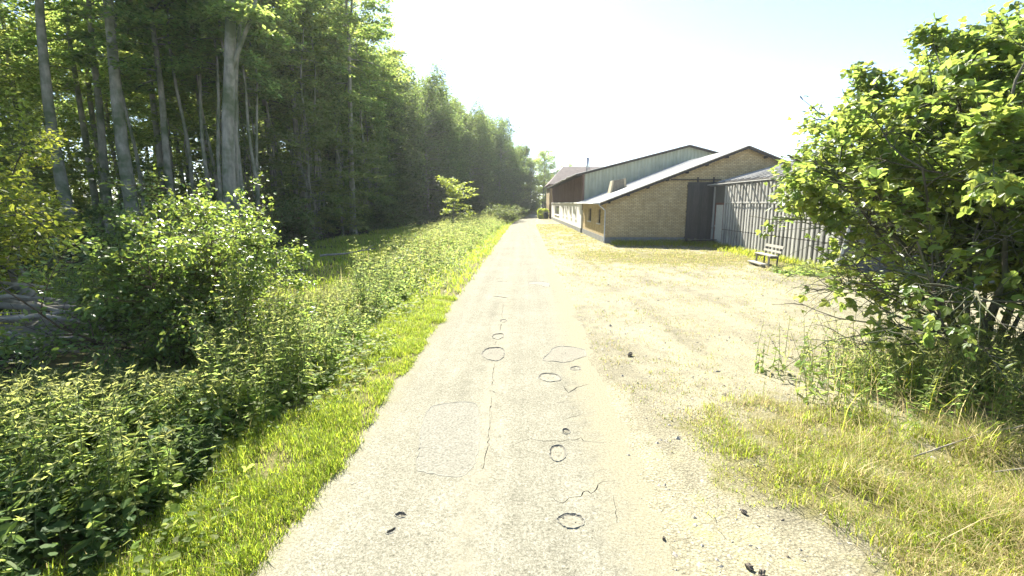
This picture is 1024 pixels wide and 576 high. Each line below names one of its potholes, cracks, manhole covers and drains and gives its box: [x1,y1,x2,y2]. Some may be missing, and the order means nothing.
pothole [481,347,505,361]
crack [483,364,495,468]
pothole [556,512,585,529]
crack [552,481,617,517]
pothole [548,444,567,462]
pothole [538,373,562,382]
